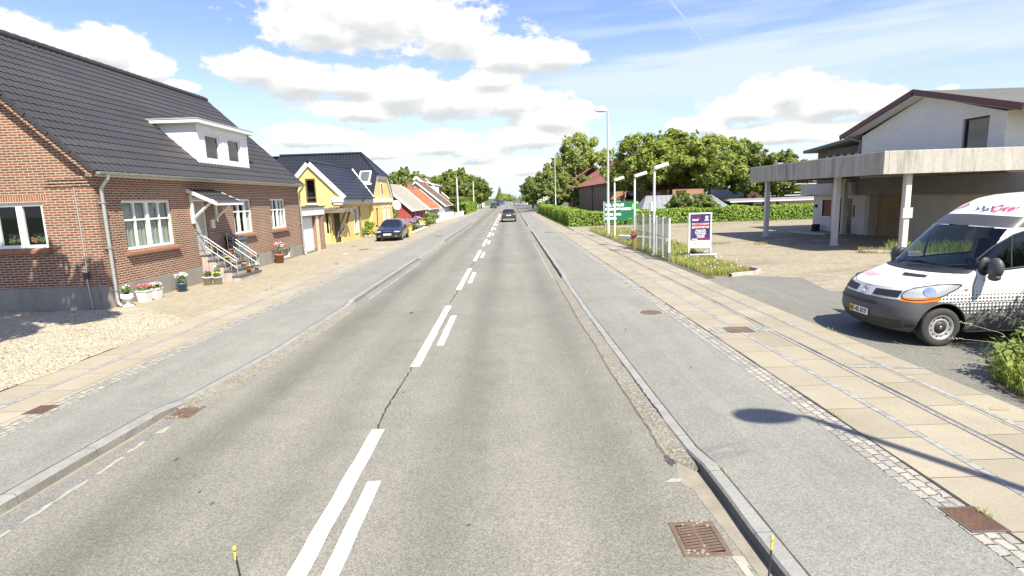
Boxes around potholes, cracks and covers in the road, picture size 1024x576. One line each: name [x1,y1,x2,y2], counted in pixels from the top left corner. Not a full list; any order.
manhole cover [938,506,1011,533]
crack [377,367,412,429]
drain grate [665,519,733,557]
manhole cover [21,405,60,415]
